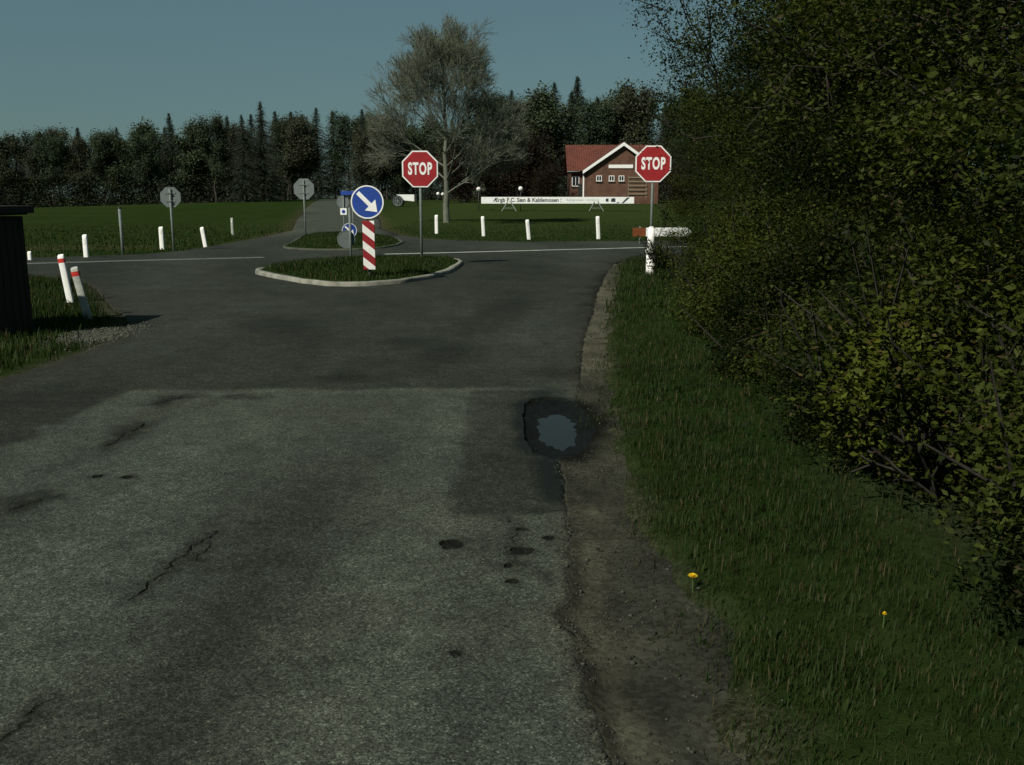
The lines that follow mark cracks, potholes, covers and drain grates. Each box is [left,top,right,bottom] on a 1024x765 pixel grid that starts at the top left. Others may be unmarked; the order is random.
pothole [439,539,464,550]
pothole [522,397,596,459]
crack [128,531,219,601]
pothole [510,547,535,555]
crack [6,397,182,511]
crack [0,699,52,750]
